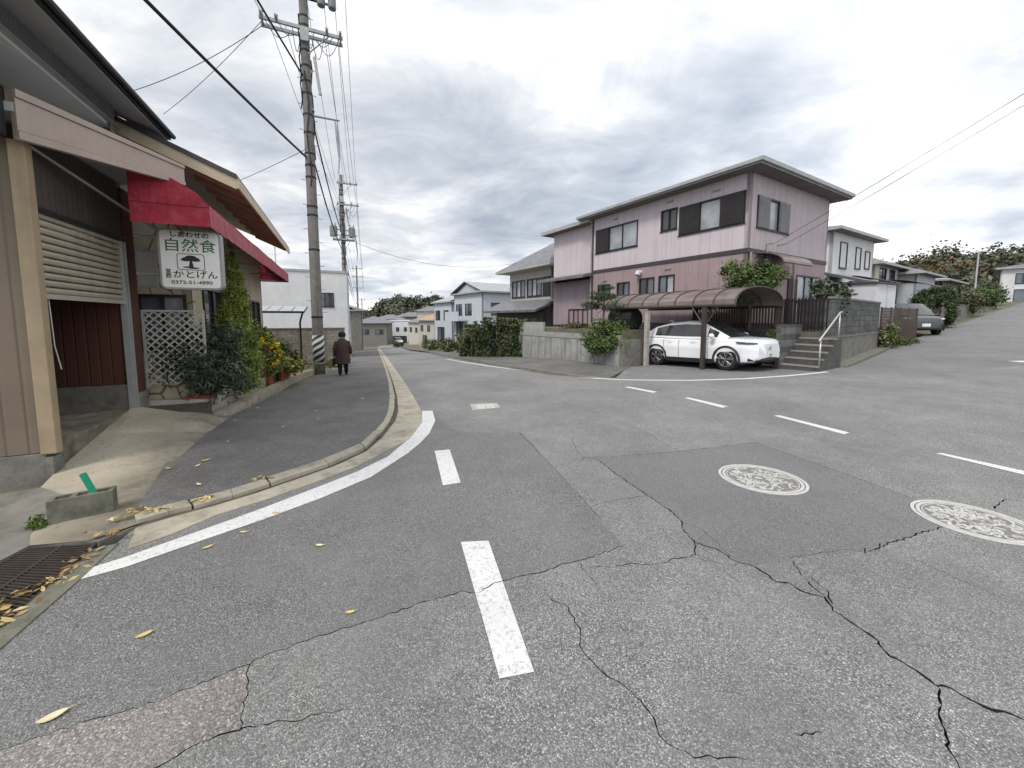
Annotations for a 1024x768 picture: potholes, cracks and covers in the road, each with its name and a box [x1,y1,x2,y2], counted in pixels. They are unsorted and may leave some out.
crack [550,597,746,760]
manhole cover [910,499,1024,546]
drain grate [0,543,98,628]
crack [1,546,622,768]
manhole cover [718,464,810,495]
crack [586,457,1024,768]
